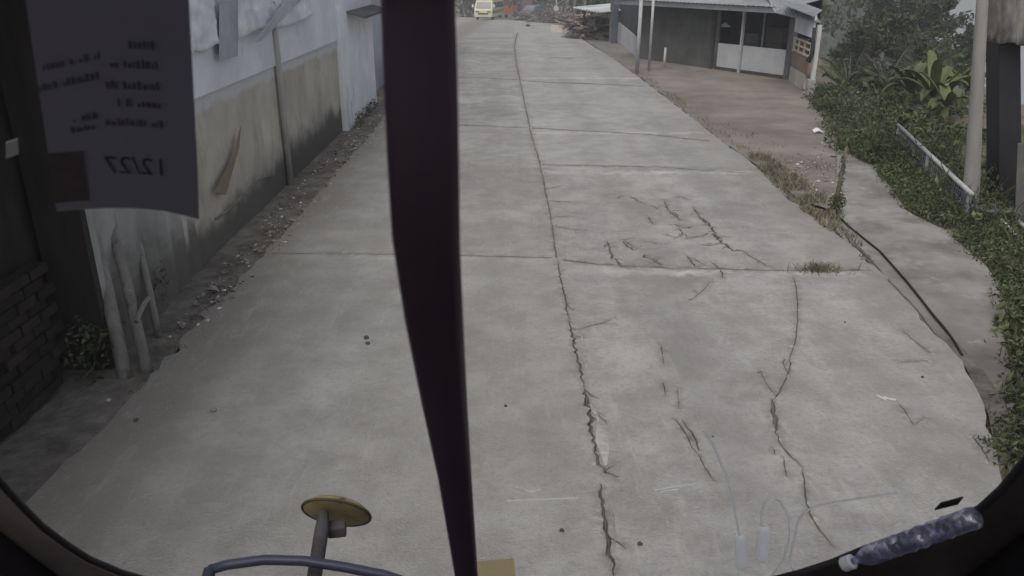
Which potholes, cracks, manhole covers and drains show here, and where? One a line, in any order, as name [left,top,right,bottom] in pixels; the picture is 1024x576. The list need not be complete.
crack [604,194,770,268]
crack [558,262,626,576]
crack [760,274,831,544]
crack [661,347,714,480]
